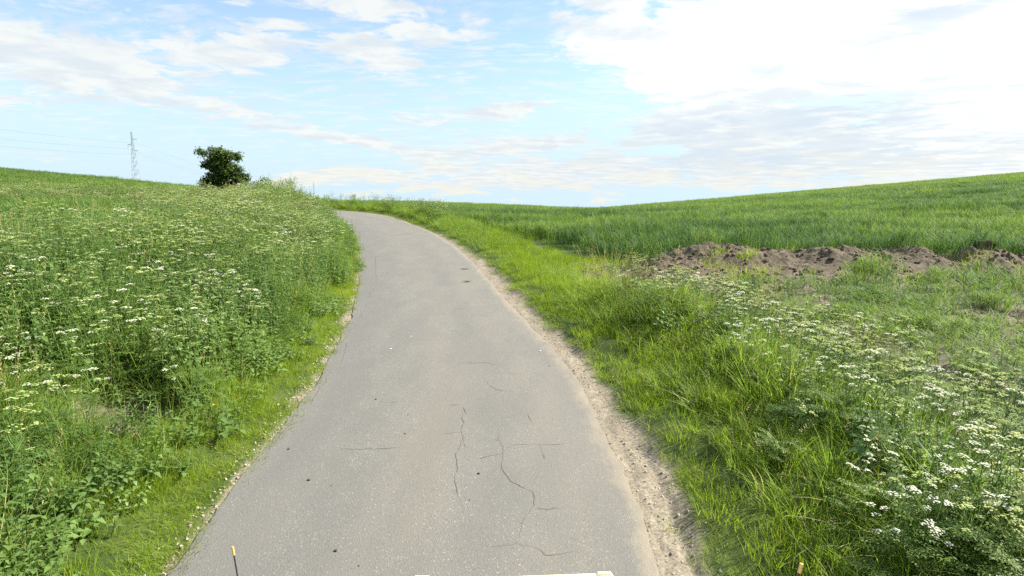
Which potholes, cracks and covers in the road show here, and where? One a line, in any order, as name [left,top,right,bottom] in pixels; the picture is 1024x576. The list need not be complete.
crack [482,433,569,555]
